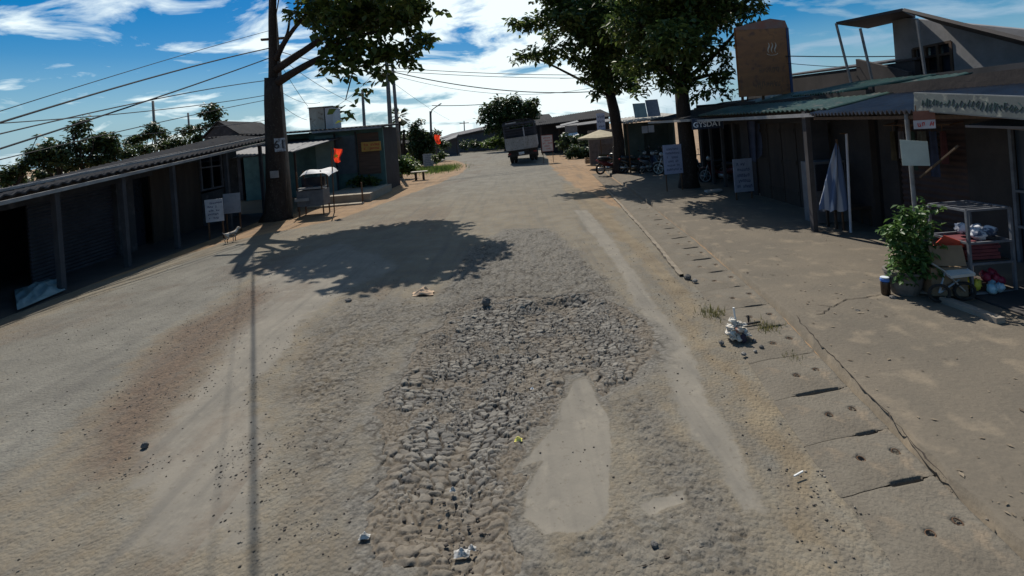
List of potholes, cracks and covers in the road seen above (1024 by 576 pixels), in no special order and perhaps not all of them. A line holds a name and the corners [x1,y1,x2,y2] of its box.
crack [797,294,947,479]
